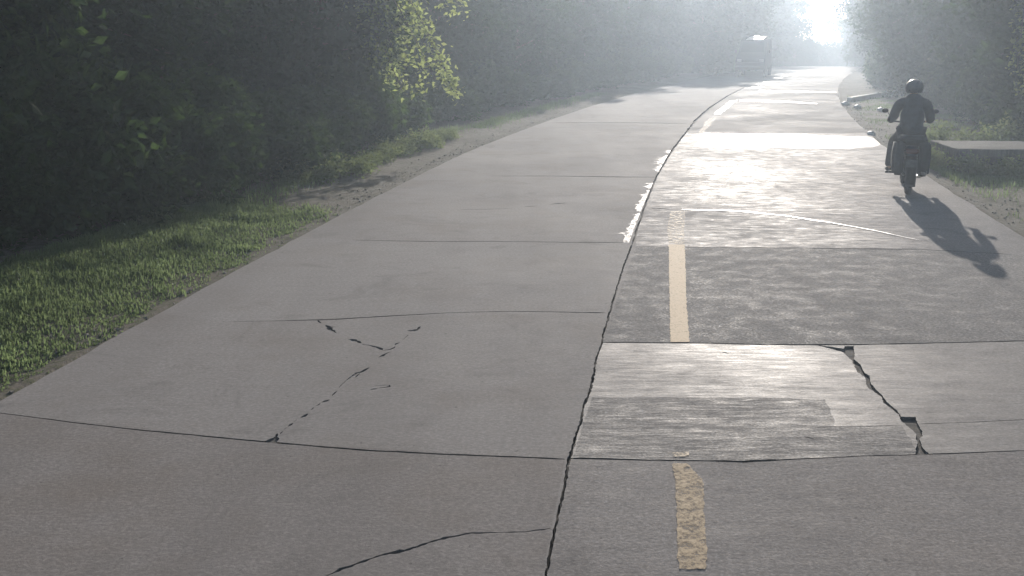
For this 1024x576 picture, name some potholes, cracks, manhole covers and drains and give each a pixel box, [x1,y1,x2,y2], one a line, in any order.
crack [266,321,421,443]
crack [657,208,917,240]
crack [327,528,549,576]
crack [822,346,1010,455]
